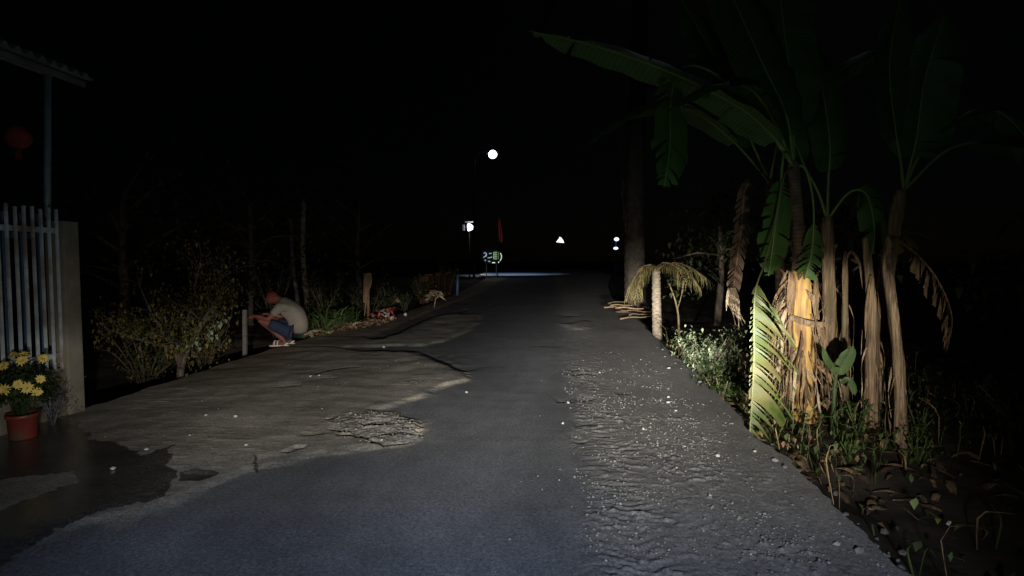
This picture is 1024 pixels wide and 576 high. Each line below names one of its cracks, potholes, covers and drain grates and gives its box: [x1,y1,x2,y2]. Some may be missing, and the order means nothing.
pothole [329,411,426,447]
pothole [179,468,219,482]
pothole [280,444,310,453]
crack [273,351,466,388]
crack [382,317,453,339]
